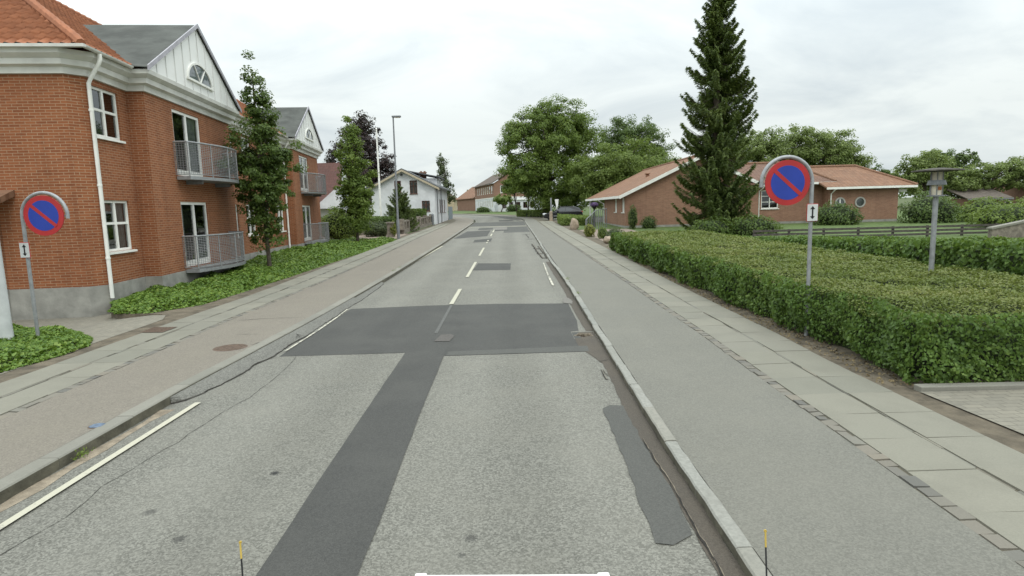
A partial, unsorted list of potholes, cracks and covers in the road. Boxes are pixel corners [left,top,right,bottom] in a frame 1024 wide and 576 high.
crack [0,362,292,555]
